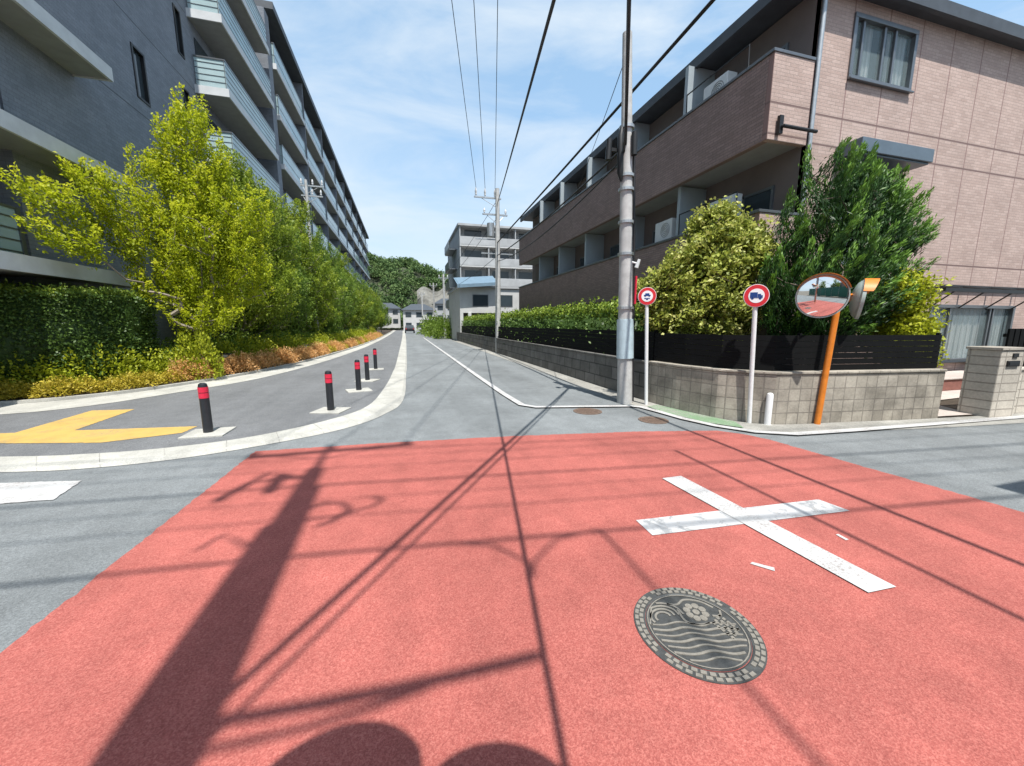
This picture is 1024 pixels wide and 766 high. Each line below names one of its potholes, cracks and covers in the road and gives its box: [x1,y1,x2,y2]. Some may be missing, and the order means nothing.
manhole cover [638,416,669,424]
manhole cover [634,587,767,685]
